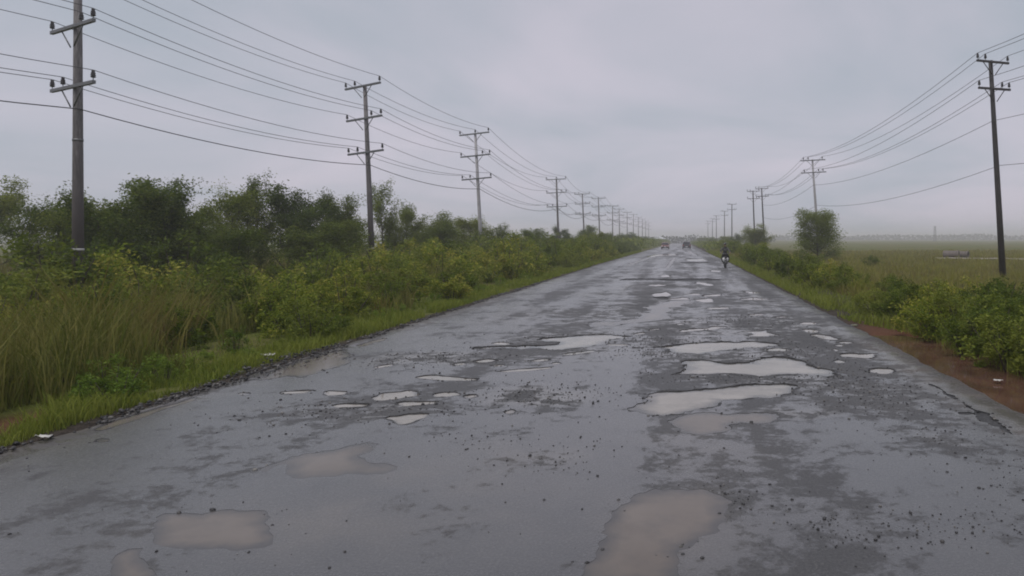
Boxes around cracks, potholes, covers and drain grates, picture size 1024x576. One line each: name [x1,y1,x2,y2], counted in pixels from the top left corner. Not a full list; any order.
pothole [472,334,630,350]
pothole [667,412,780,435]
pothole [371,390,421,401]
pothole [259,442,398,479]
pothole [582,488,733,576]
crack [929,384,1012,434]
pothole [632,341,784,354]
pothole [150,509,274,551]
pothole [627,383,800,416]
pothole [383,412,430,425]
pothole [671,356,841,378]
